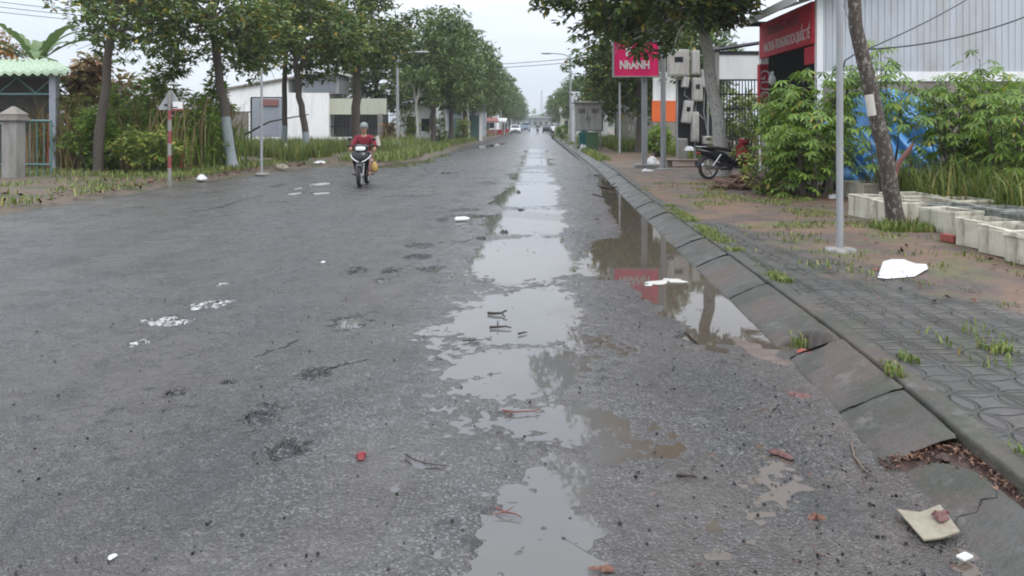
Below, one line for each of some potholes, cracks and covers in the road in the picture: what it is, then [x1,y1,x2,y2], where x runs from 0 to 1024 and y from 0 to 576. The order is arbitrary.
pothole [295,367,332,381]
pothole [261,439,312,461]
pothole [328,314,376,332]
pothole [237,403,286,433]
pothole [164,388,186,397]
